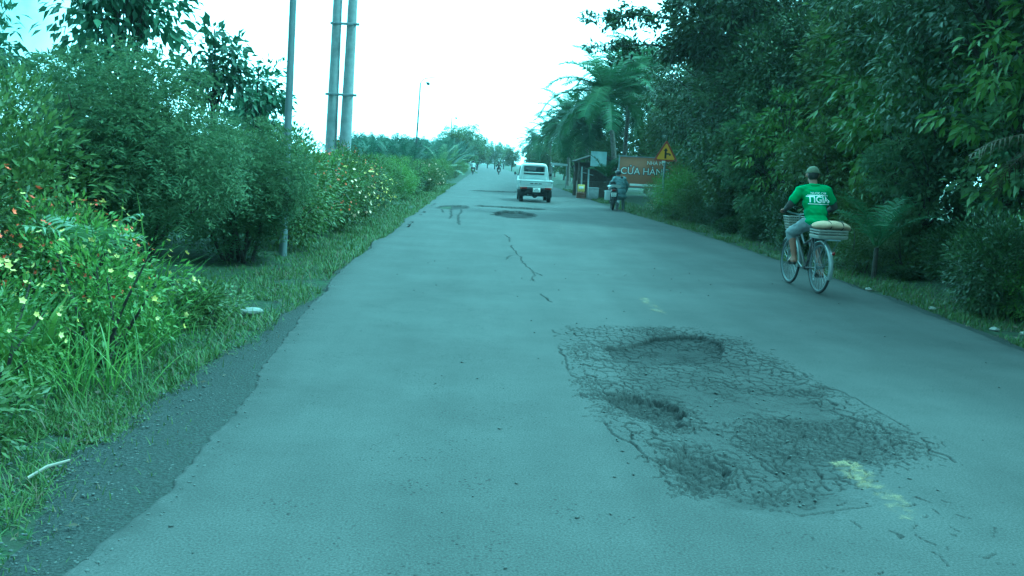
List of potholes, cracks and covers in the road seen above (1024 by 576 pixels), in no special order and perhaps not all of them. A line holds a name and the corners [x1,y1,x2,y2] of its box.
crack [505,235,1024,576]
pothole [489,210,538,219]
crack [439,209,464,225]
pothole [595,390,694,433]
pothole [658,445,737,499]
pothole [601,334,728,368]
